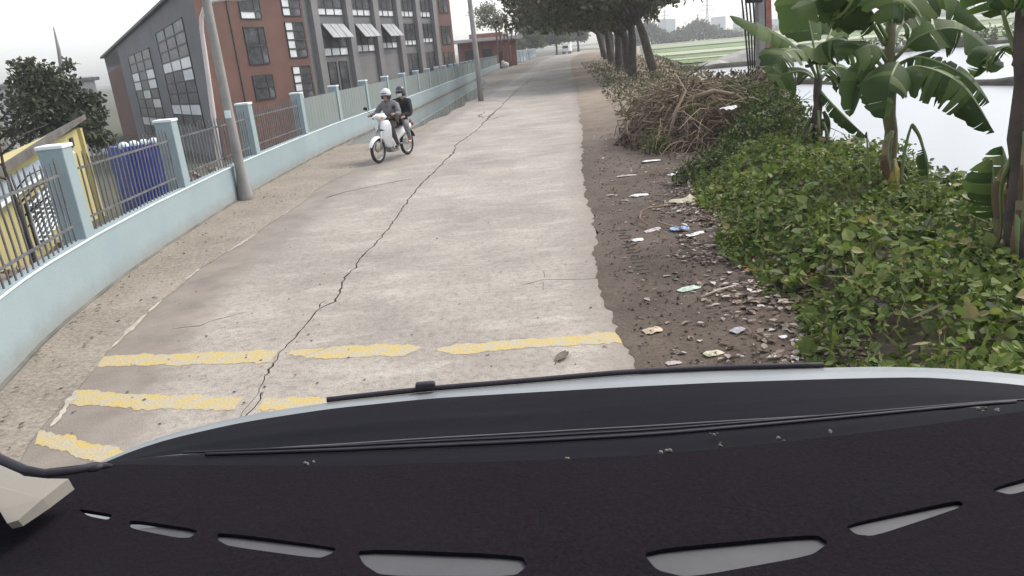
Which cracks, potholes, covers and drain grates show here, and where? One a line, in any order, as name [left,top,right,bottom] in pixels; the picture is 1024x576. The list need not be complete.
crack [241,83,525,416]
